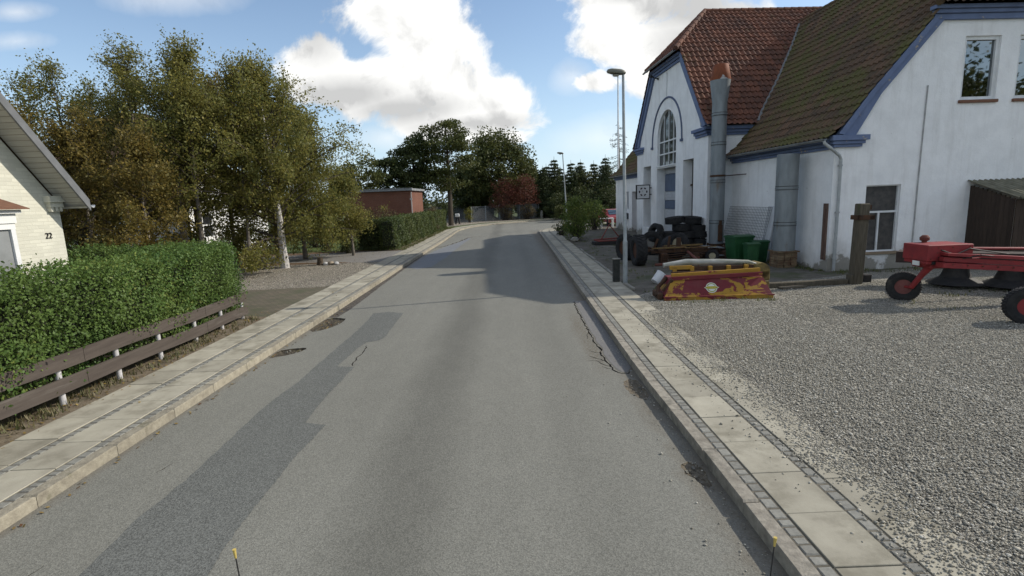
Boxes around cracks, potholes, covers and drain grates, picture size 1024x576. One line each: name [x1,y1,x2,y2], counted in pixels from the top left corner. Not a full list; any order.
pothole [681,462,712,489]
pothole [310,318,345,332]
pothole [270,348,306,358]
crack [573,301,630,374]
